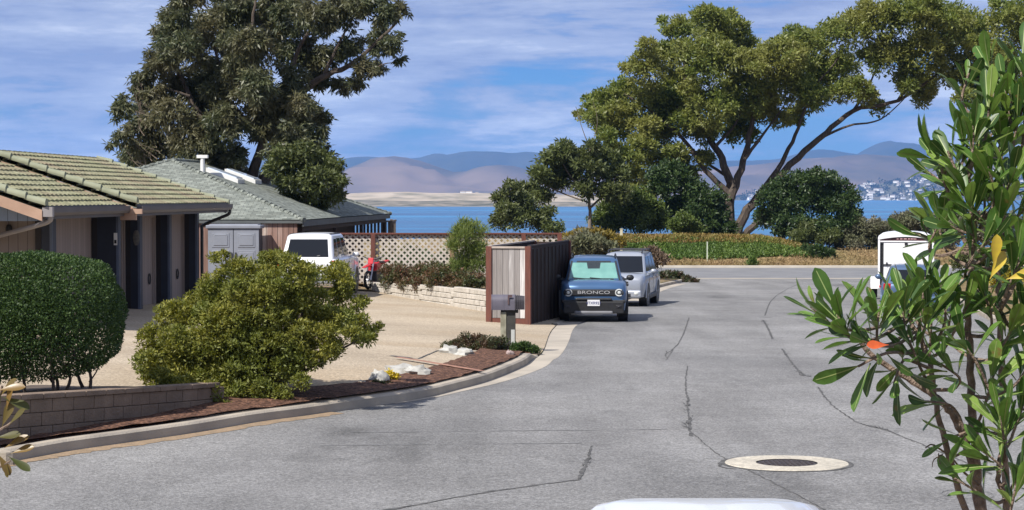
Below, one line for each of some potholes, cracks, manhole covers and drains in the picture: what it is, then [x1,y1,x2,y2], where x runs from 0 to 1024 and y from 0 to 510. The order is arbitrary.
crack [382,446,592,510]
manhole cover [720,455,854,472]
crack [761,287,992,474]
crack [665,319,826,510]
